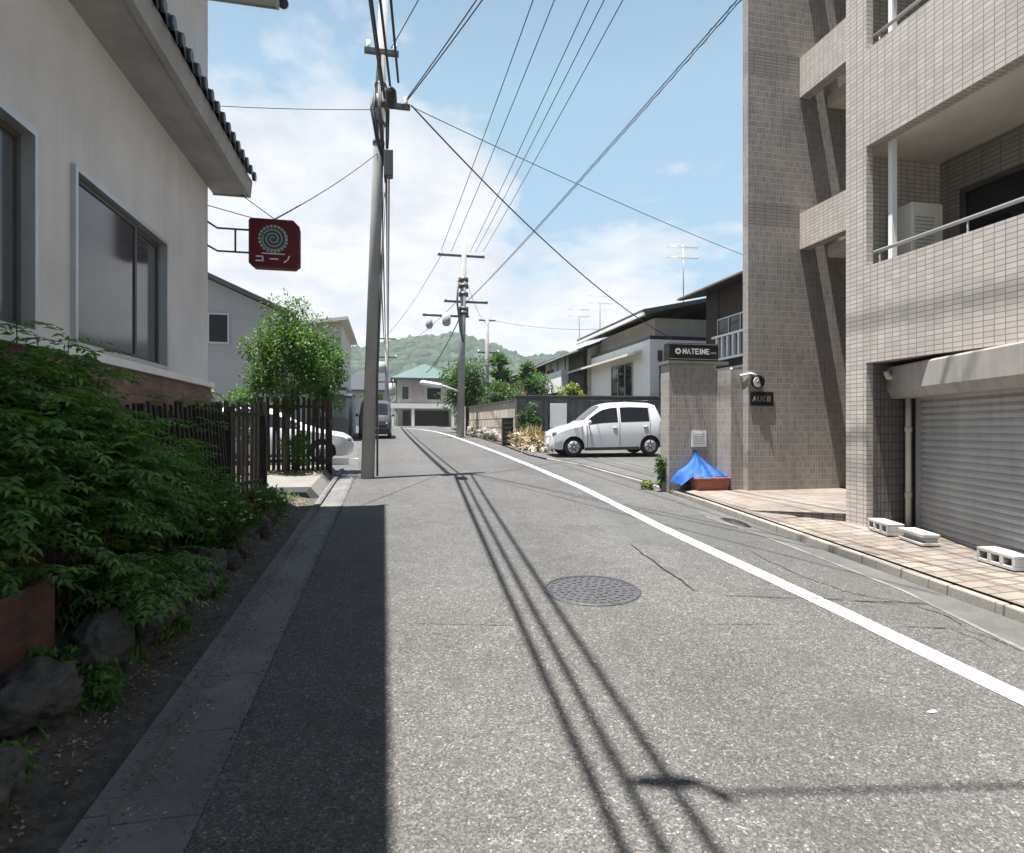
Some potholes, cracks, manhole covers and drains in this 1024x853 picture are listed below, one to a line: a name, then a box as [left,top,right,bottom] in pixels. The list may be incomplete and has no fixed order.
manhole cover [543,575,641,606]
